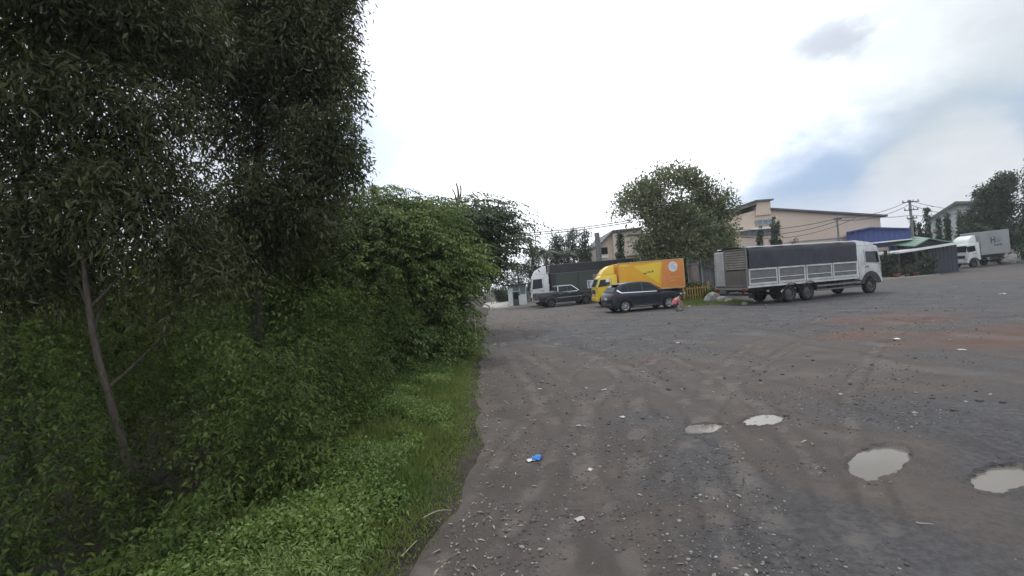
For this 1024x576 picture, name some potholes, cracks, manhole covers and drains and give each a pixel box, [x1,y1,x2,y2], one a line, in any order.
pothole [837,440,921,485]
pothole [736,413,791,428]
pothole [959,459,1024,497]
pothole [678,421,727,436]
